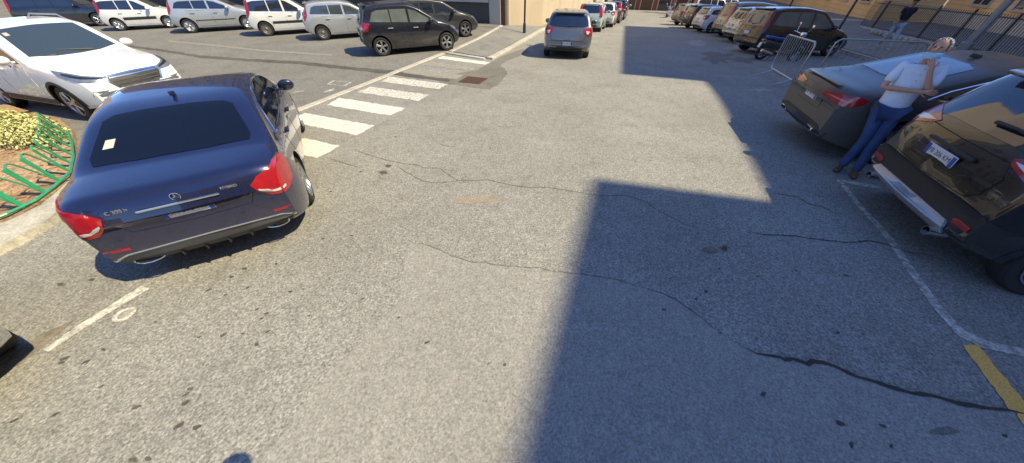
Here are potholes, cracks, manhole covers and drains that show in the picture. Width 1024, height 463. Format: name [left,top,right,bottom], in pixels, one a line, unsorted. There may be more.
crack [330,149,697,228]
crack [748,231,926,255]
drain grate [458,76,488,84]
crack [747,348,1024,414]
